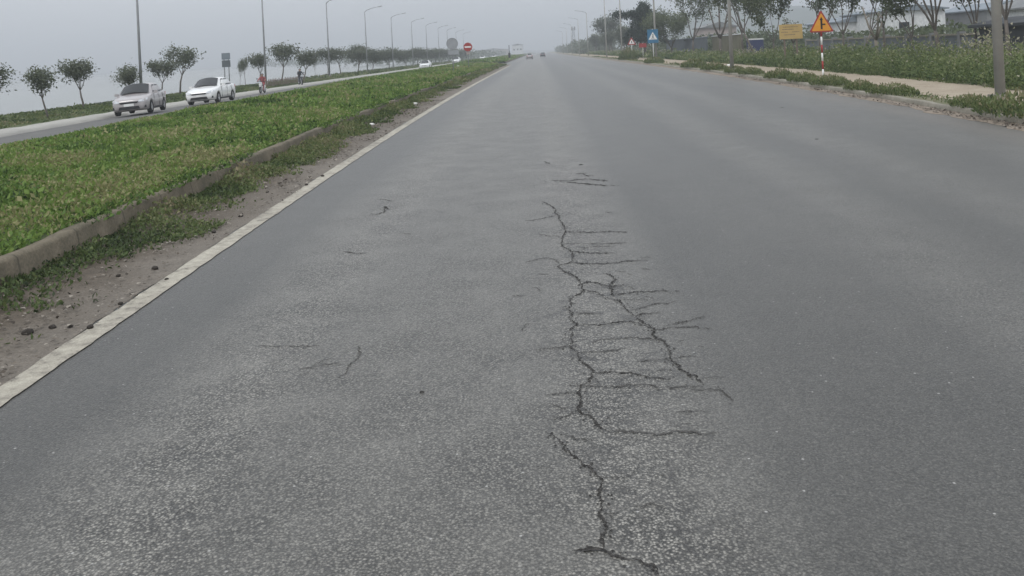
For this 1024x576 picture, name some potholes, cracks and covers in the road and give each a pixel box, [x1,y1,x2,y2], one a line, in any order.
crack [260,345,366,377]
crack [551,173,619,187]
crack [512,201,731,574]
